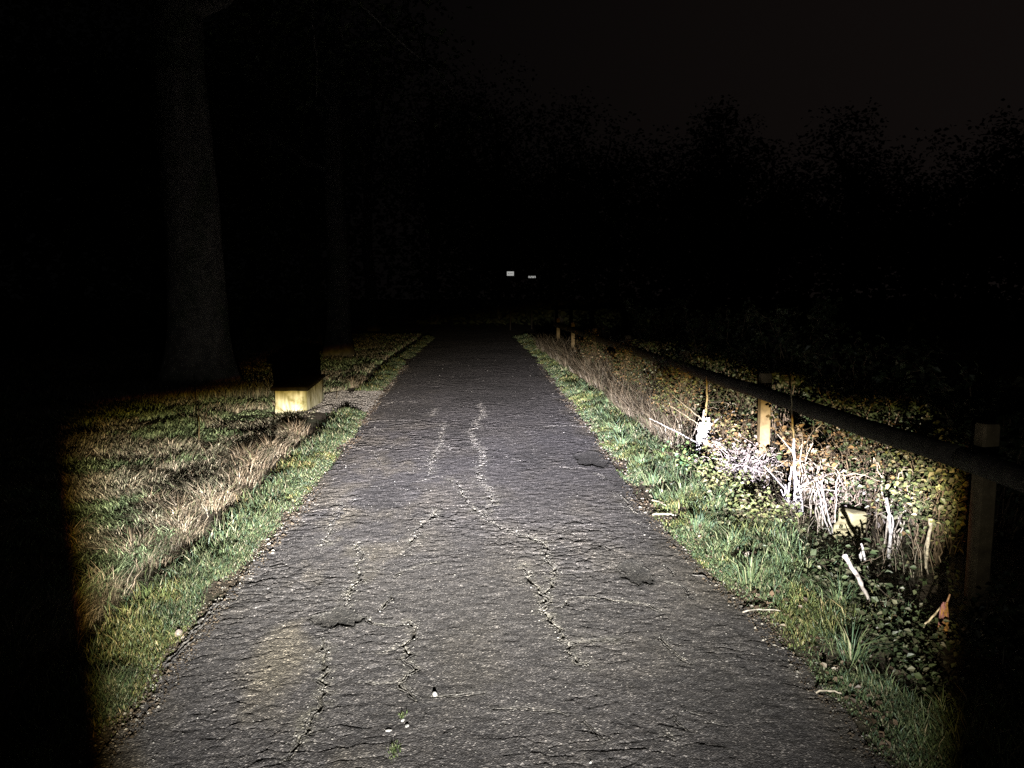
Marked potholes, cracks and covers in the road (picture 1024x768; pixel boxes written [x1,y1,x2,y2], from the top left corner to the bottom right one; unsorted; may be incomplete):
crack [662,710,726,741]
pothole [572,451,611,469]
crack [321,401,710,742]
pothole [307,606,368,629]
crack [287,639,330,761]
pothole [616,558,656,587]
